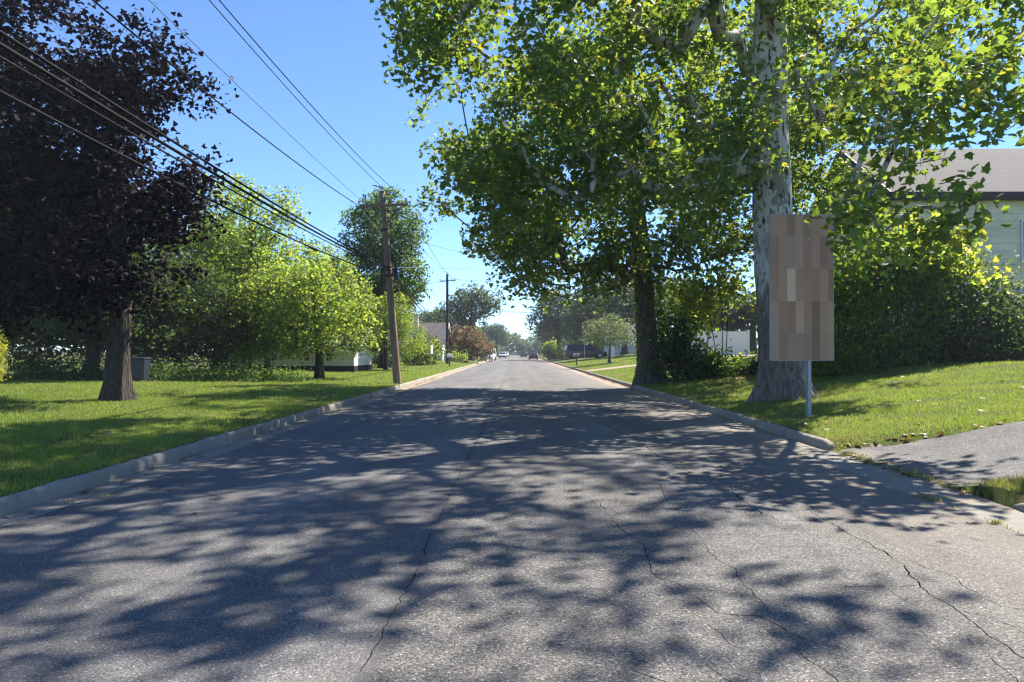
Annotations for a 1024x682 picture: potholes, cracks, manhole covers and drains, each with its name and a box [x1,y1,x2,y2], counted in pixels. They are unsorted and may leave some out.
crack [598,422,1024,682]
